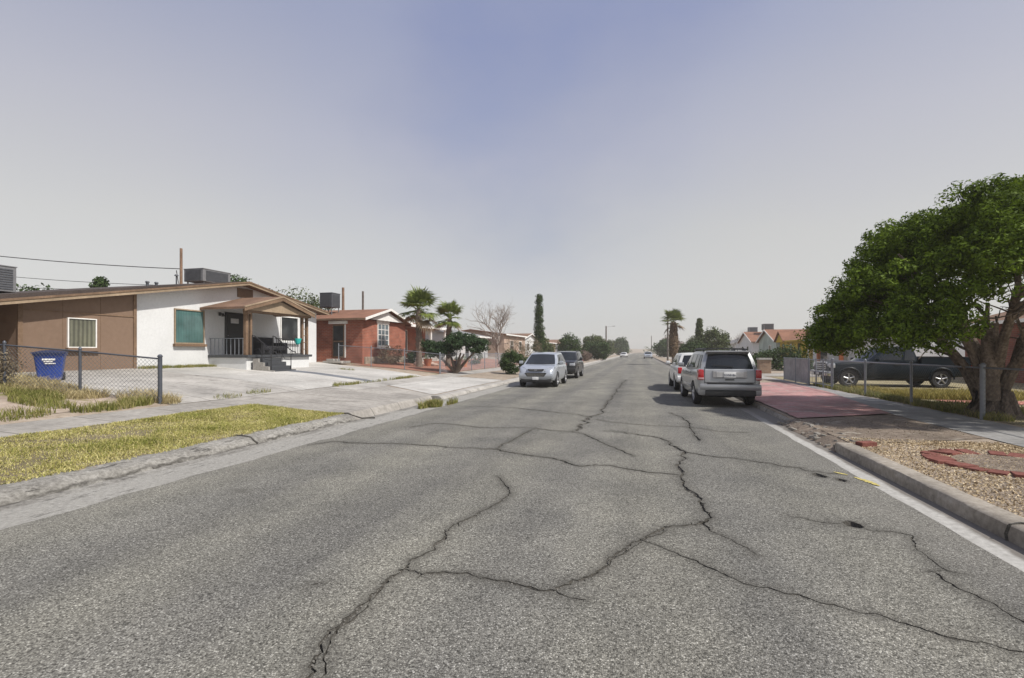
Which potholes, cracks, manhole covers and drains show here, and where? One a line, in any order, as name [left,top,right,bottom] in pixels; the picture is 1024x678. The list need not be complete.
crack [307,380,1024,678]
